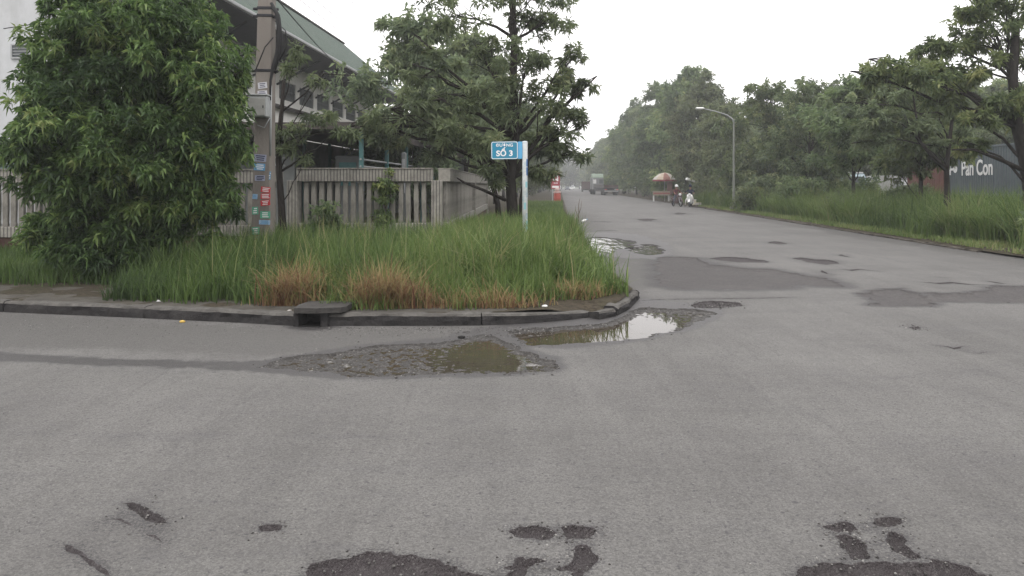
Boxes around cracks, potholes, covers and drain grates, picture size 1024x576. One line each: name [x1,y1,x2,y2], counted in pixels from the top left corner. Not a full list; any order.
pothole [822,521,858,533]
pothole [258,334,560,377]
pothole [885,531,921,559]
pothole [561,525,596,540]
pothole [306,551,483,576]
pothole [835,534,870,560]
pothole [258,524,282,532]
pothole [508,526,557,540]
pothole [796,558,986,576]
pothole [503,557,547,576]
pothole [558,544,599,576]
pothole [872,517,902,527]
